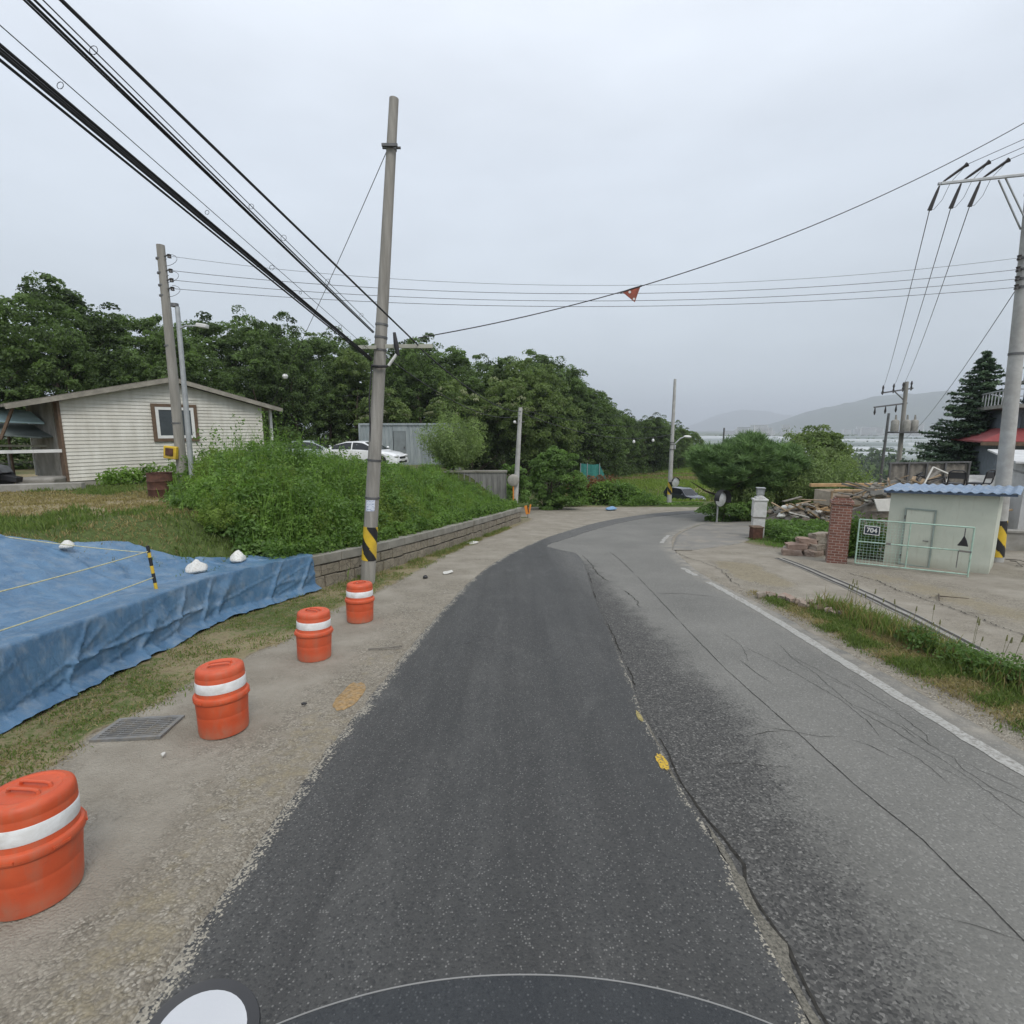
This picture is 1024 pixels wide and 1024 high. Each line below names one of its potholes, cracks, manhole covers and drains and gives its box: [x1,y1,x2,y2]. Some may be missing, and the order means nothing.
crack [724,634,1024,827]
drain grate [89,715,185,743]
